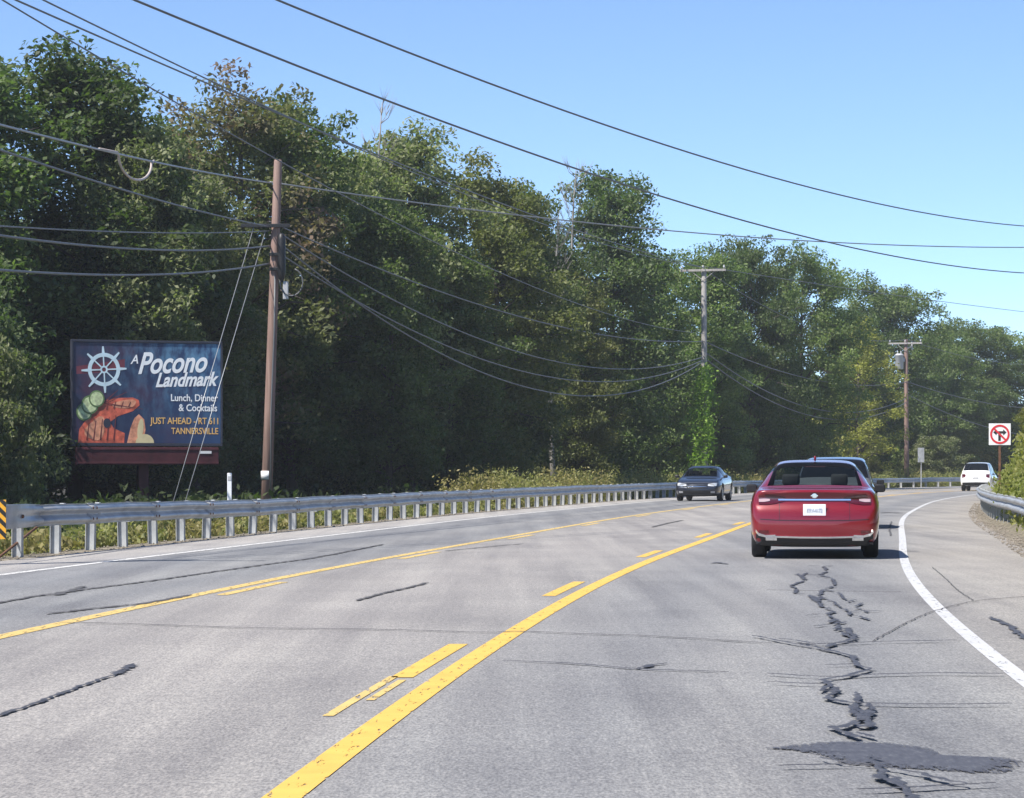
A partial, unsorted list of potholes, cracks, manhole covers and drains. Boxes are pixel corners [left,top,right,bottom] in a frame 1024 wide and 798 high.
crack [507,660,729,672]
crack [873,567,1024,641]
